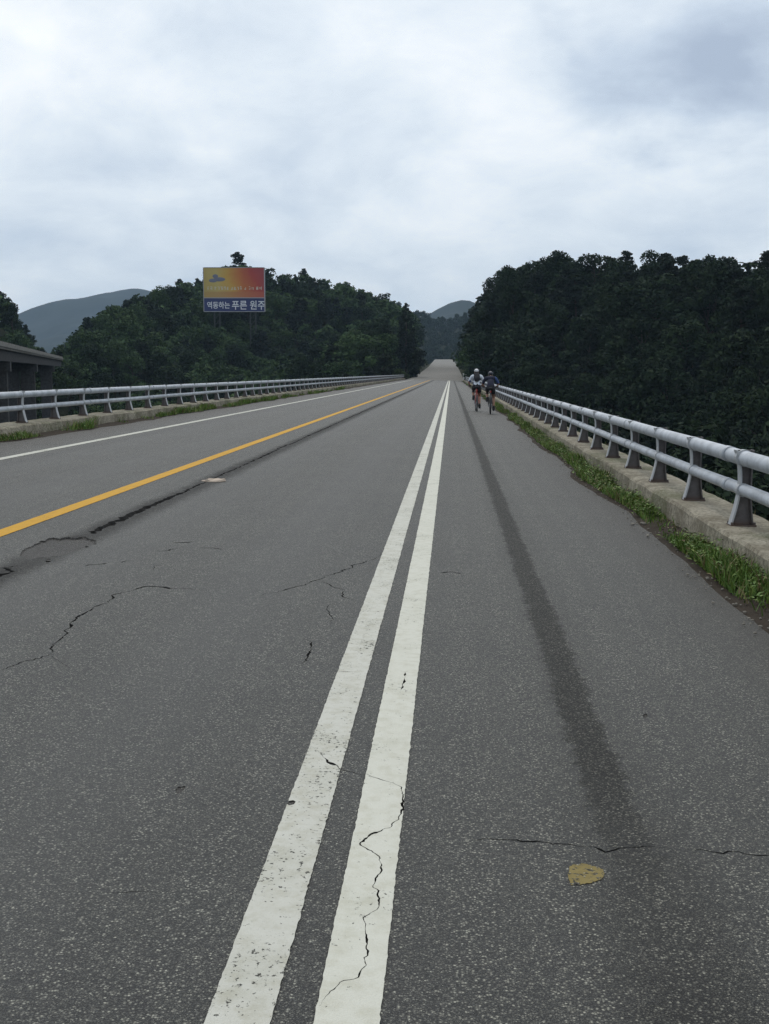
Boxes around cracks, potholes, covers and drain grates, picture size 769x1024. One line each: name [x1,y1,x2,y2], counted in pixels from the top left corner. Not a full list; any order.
crack [244,554,381,620]
crack [326,760,404,978]
crack [3,586,210,670]
crack [471,838,660,853]
